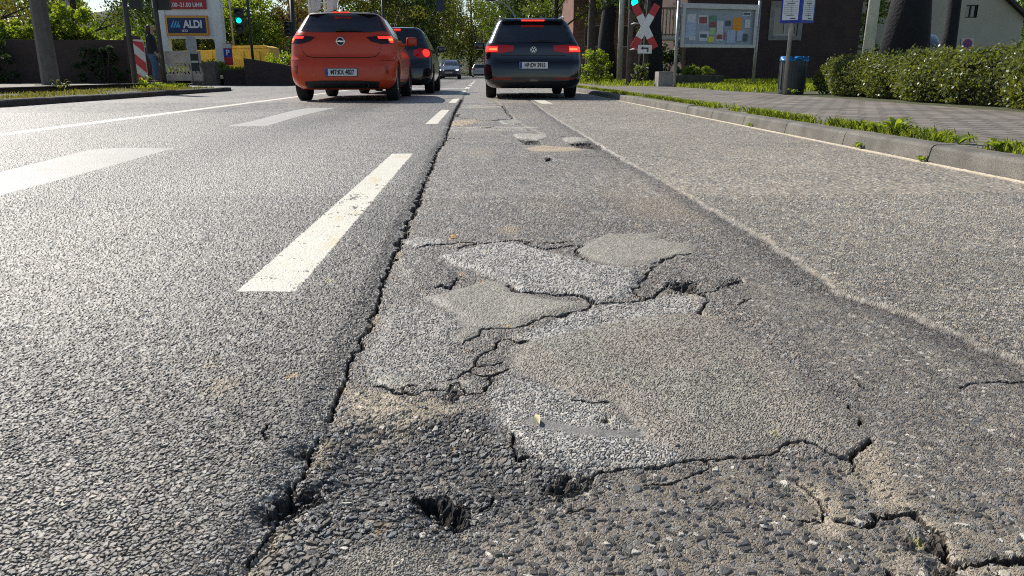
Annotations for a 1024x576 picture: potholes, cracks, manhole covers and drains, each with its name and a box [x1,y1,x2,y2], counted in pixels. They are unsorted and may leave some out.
crack [590,378,874,486]
crack [377,253,751,396]
crack [511,434,527,463]
crack [960,381,1024,389]
crack [787,480,1024,572]
crack [417,240,602,265]
pothole [411,494,469,534]
pothole [546,472,591,502]
